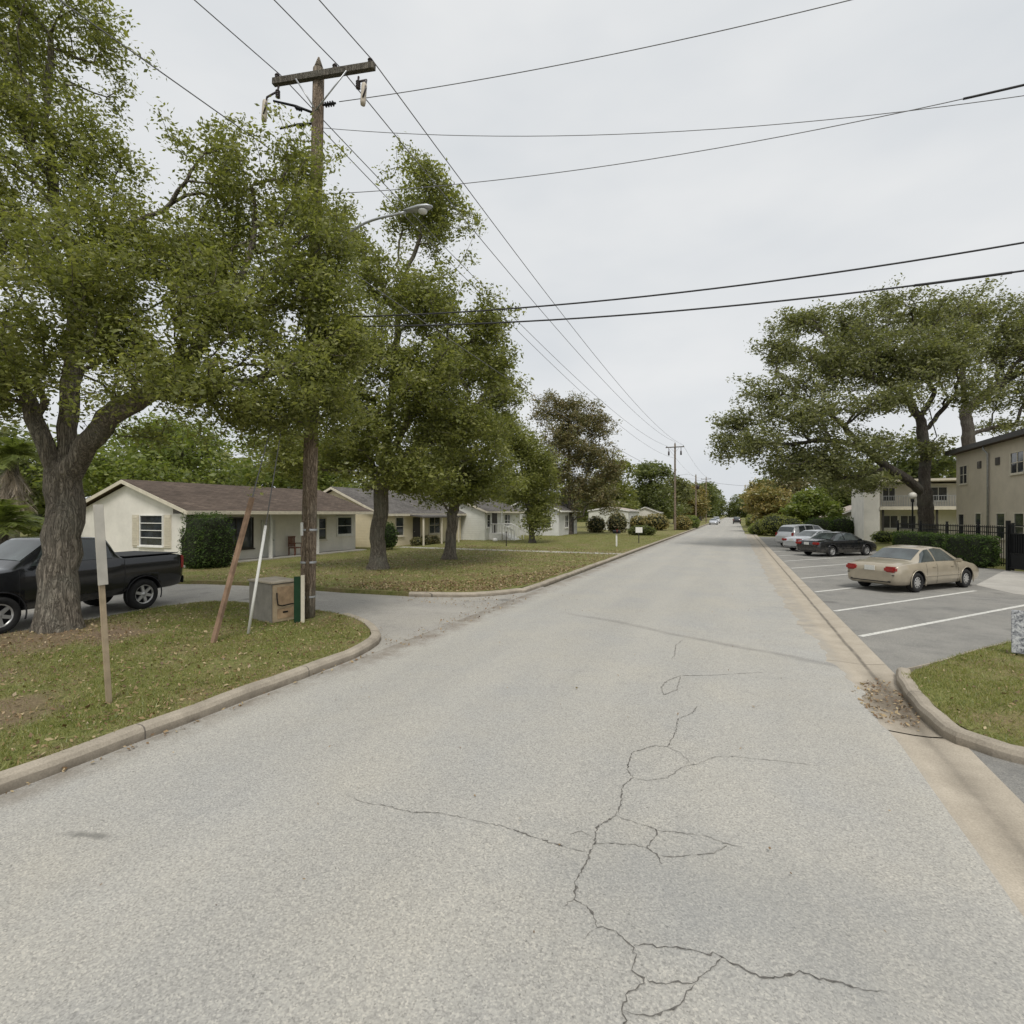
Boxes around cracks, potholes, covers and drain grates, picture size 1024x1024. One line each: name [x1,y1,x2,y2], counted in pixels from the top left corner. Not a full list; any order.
crack [344,706,874,1024]
